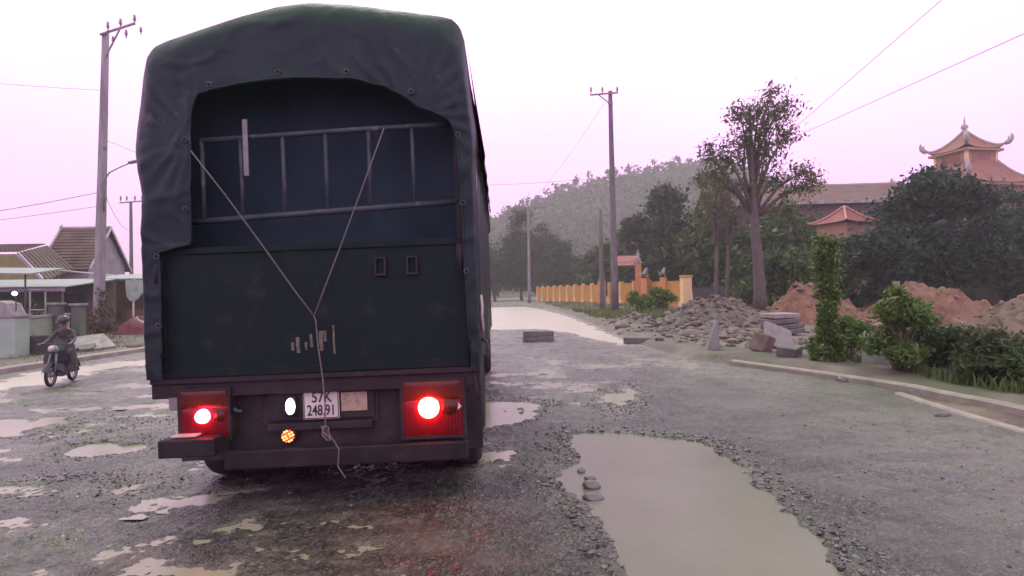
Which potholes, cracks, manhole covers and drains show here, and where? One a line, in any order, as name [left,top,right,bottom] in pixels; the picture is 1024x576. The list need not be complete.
pothole [545,427,863,576]
pothole [483,399,553,429]
pothole [54,437,158,458]
pothole [589,385,649,412]
pothole [0,413,105,439]
